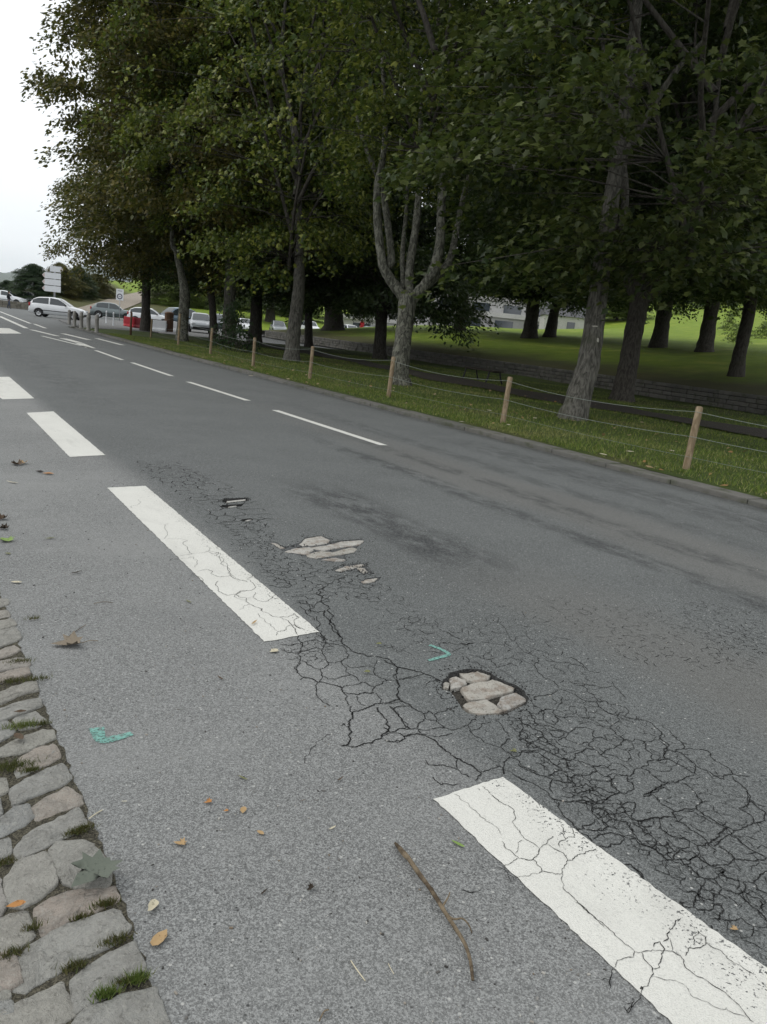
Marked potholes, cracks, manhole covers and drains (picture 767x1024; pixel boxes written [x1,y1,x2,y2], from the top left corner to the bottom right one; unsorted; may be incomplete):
pothole [327,561,374,575]
pothole [257,534,376,565]
pothole [429,658,536,722]
pothole [359,577,381,585]
crack [137,461,767,1021]
